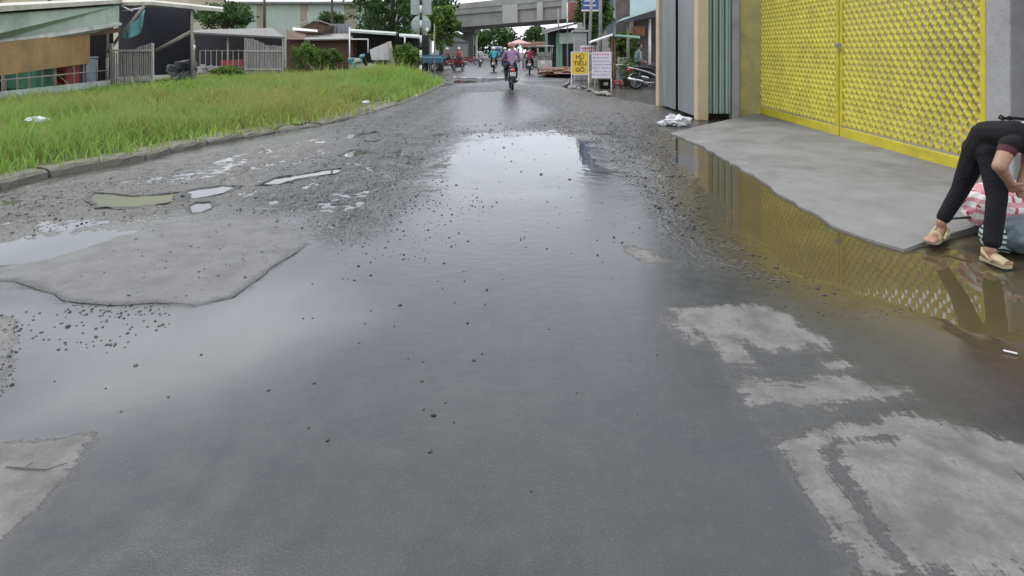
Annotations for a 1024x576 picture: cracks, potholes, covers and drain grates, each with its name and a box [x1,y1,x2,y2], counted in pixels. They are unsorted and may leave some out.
pothole [257,167,346,185]
pothole [84,191,191,209]
pothole [183,200,221,215]
pothole [173,184,244,201]
